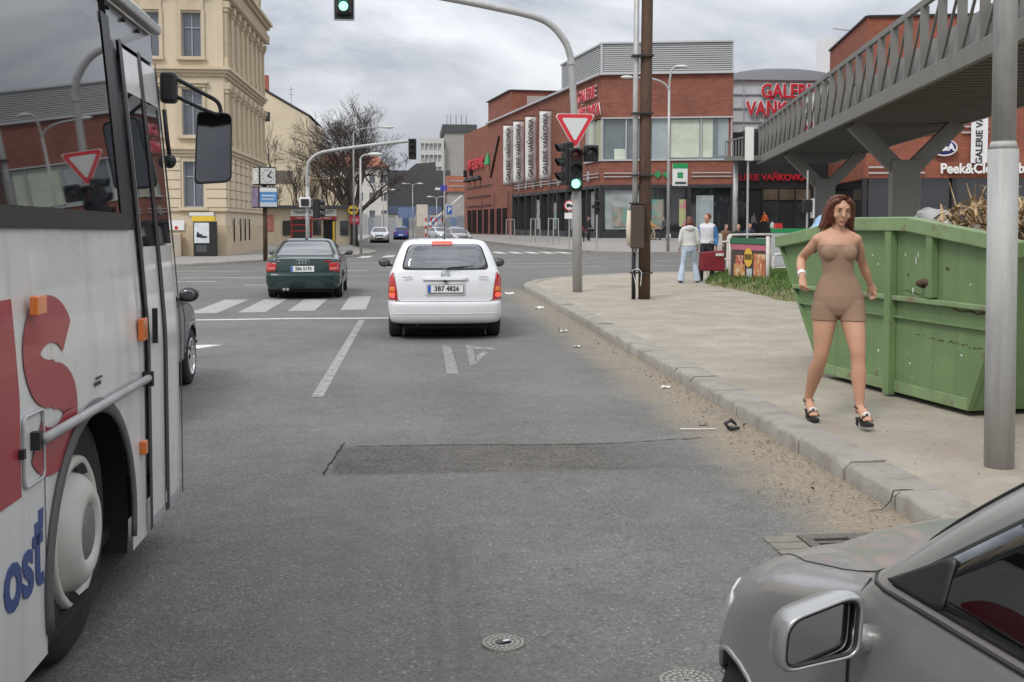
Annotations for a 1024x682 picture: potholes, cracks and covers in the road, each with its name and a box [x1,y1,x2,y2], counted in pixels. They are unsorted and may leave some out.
manhole cover [657,669,715,682]
drain grate [762,531,876,555]
manhole cover [481,634,526,653]
